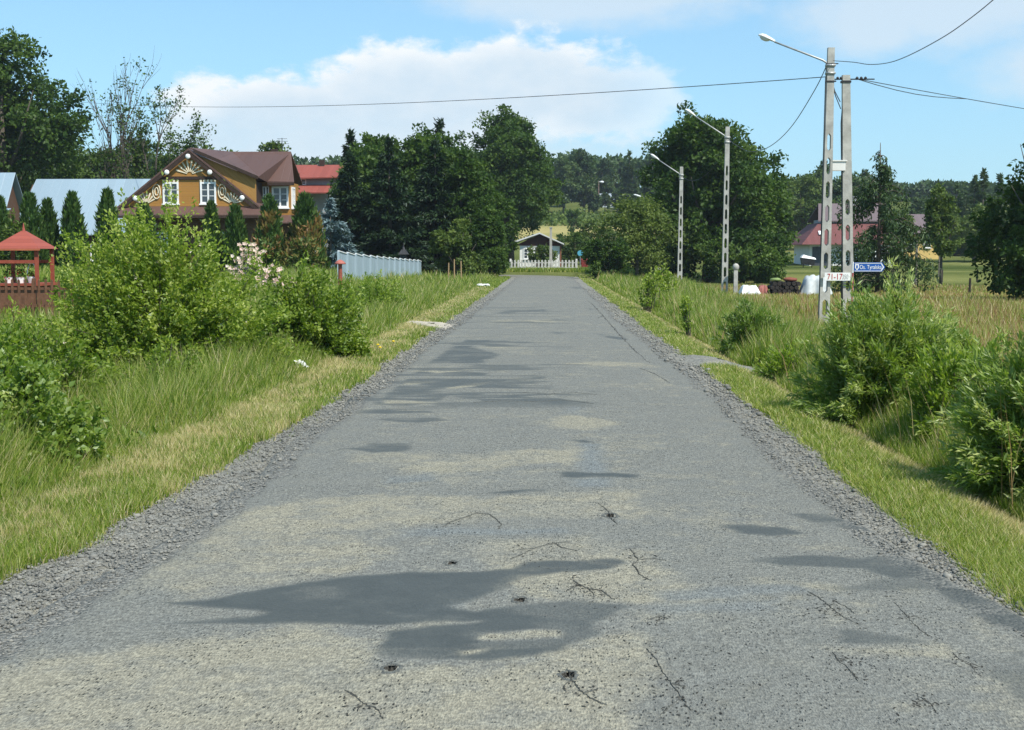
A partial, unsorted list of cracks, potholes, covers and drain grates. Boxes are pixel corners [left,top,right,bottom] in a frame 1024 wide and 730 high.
crack [547,631,812,730]
pothole [379,663,403,674]
crack [780,587,1007,692]
pothole [556,669,579,681]
crack [436,511,670,613]
crack [300,680,412,728]
crack [893,692,968,720]
crack [591,303,670,383]
